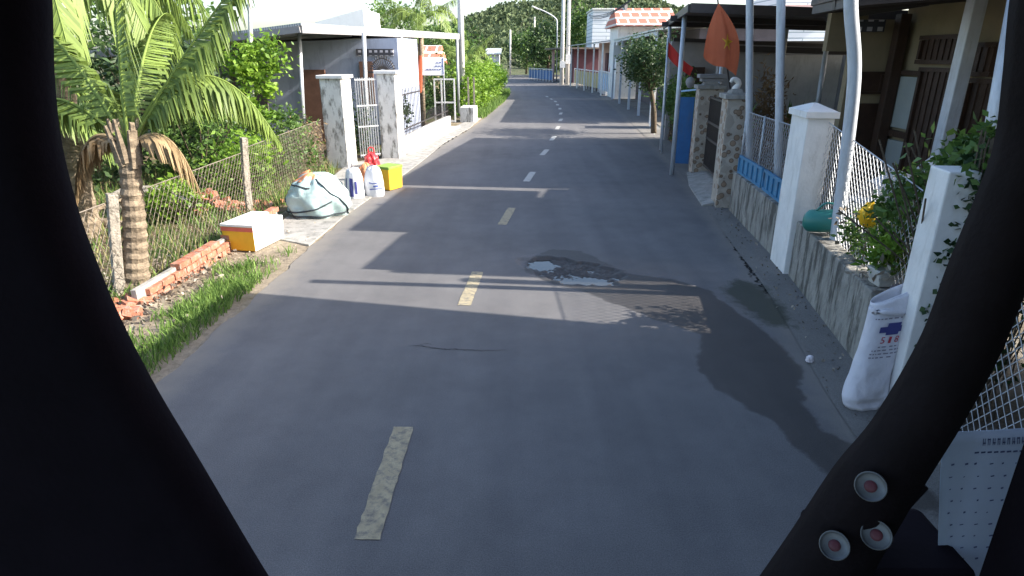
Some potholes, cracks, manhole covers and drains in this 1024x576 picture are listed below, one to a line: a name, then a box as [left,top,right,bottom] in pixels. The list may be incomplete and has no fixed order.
pothole [506,254,637,289]
